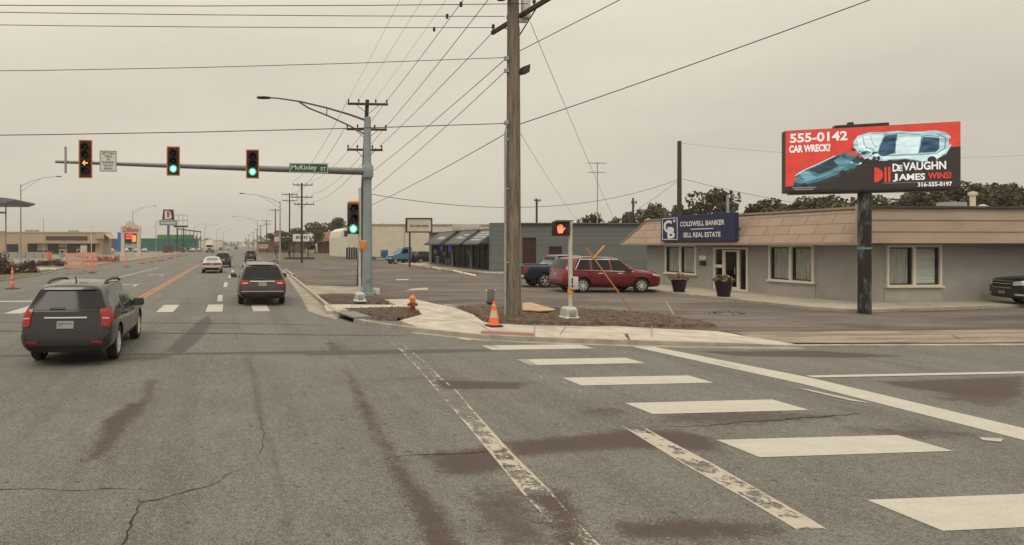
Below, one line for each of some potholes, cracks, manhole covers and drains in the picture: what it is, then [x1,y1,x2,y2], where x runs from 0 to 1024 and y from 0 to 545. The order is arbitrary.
crack [652,413,856,427]
drain grate [337,311,372,323]
crack [0,420,265,545]
